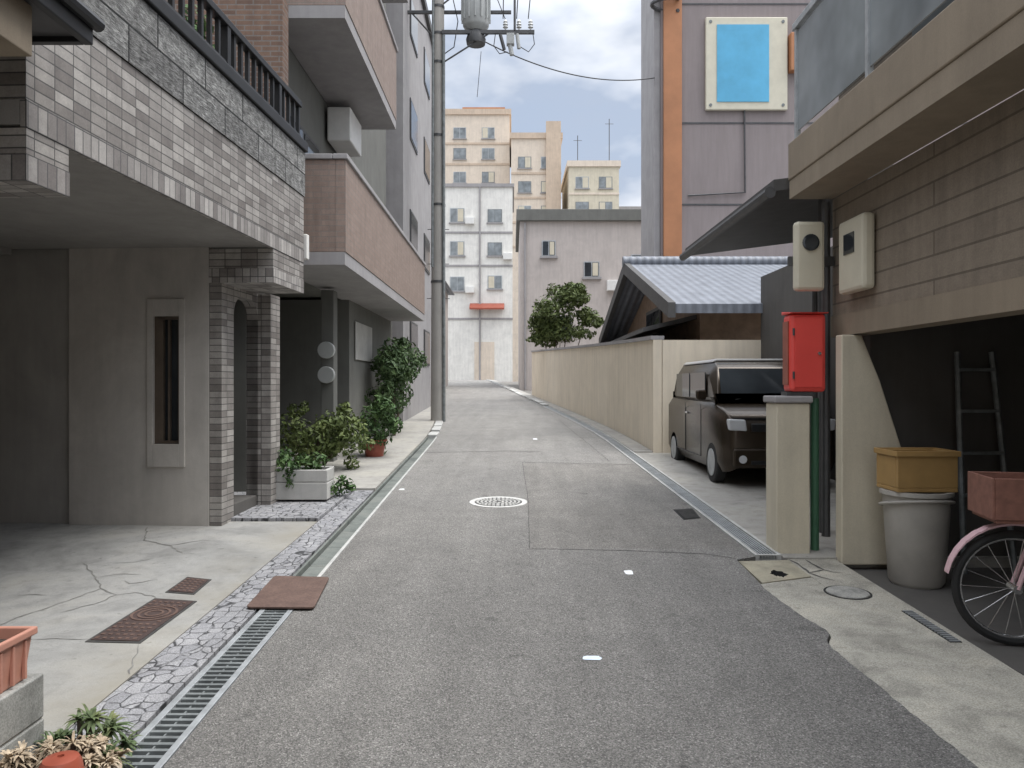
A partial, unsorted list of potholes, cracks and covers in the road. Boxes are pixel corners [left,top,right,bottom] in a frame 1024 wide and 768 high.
manhole cover [469,496,527,508]
crack [789,559,842,581]
manhole cover [165,577,212,595]
crack [0,528,215,625]
manhole cover [823,586,873,600]
manhole cover [85,598,197,644]
